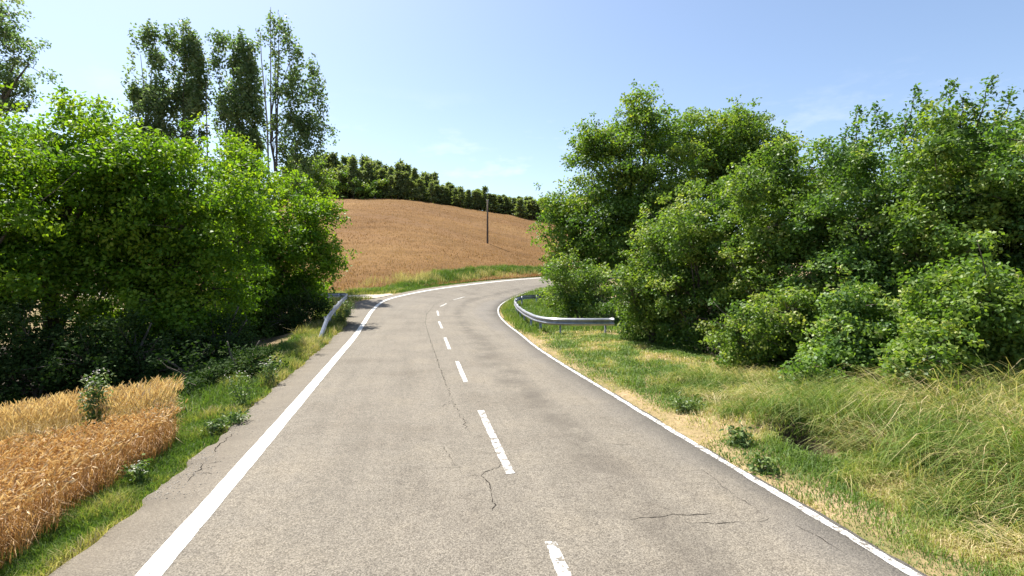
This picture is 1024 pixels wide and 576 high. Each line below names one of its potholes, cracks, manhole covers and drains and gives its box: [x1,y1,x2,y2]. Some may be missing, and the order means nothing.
crack [636,469,765,524]
